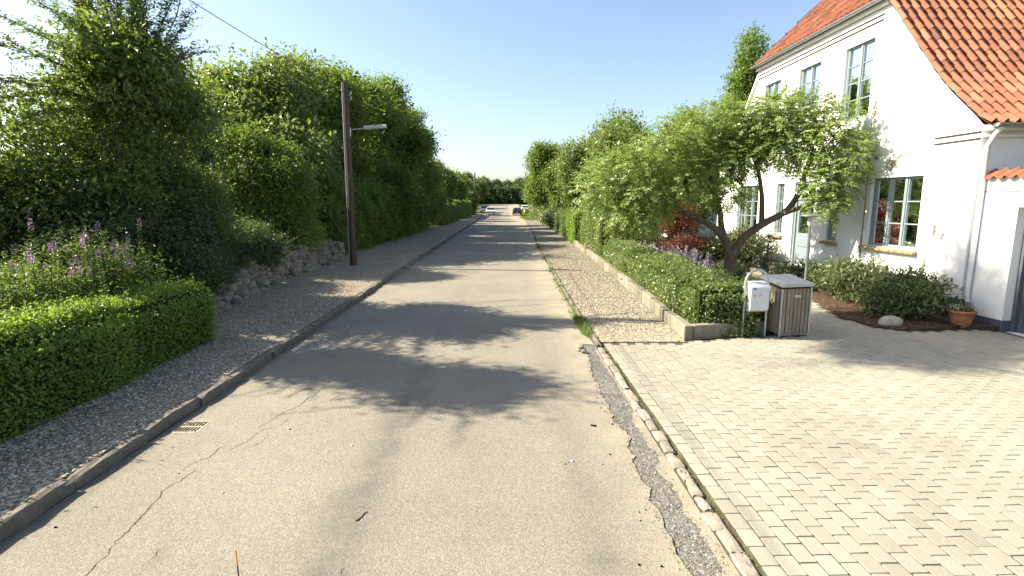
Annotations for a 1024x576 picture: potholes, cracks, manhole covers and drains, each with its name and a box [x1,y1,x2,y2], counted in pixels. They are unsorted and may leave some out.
drain grate [170,421,211,433]
crack [85,447,221,576]
crack [231,385,356,449]
pothole [583,344,722,576]
